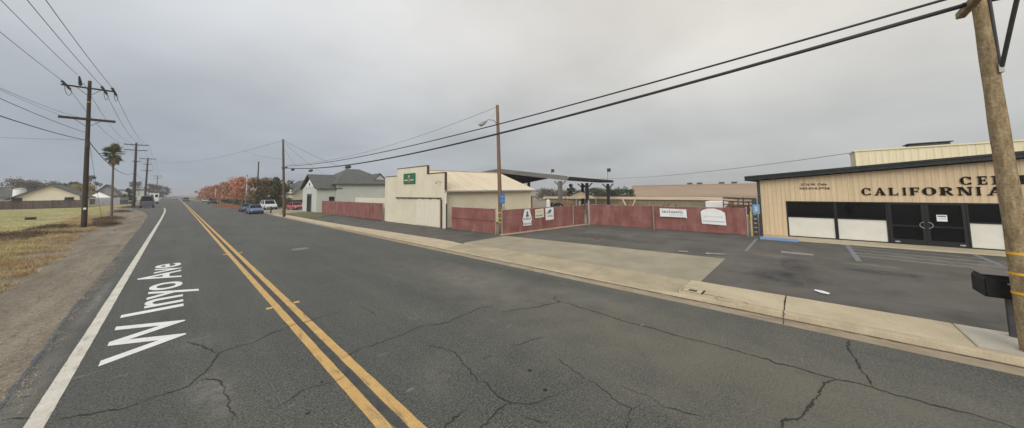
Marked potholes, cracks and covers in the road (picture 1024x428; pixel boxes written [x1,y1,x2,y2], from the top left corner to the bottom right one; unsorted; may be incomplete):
crack [341,306,493,359]
crack [428,337,555,428]
crack [62,311,340,420]
crack [557,358,701,428]
